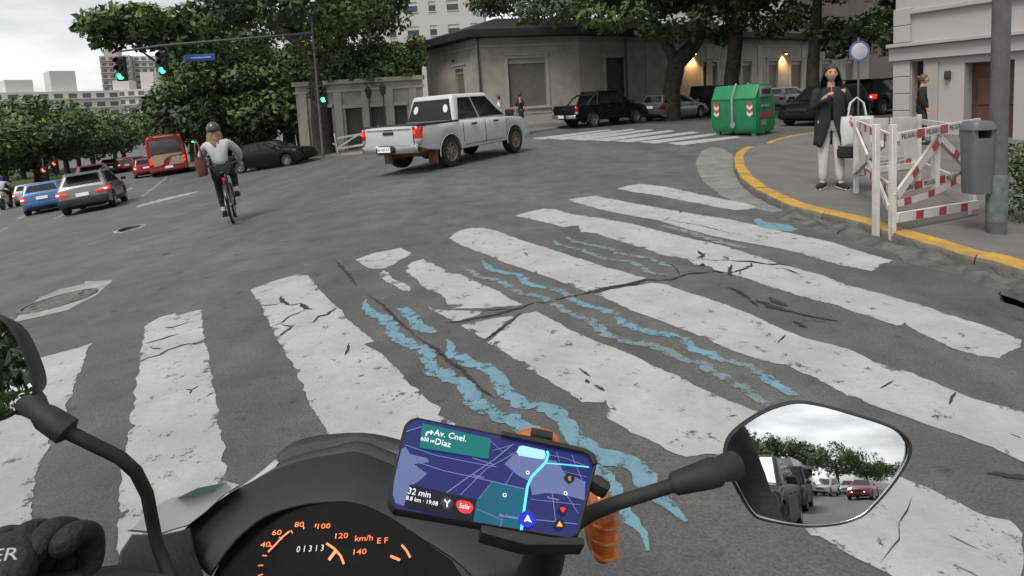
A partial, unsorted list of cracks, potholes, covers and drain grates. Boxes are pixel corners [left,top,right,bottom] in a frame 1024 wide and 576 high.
crack [335,251,956,416]
crack [882,497,912,560]
manhole cover [15,288,98,315]
pothole [998,291,1024,309]
